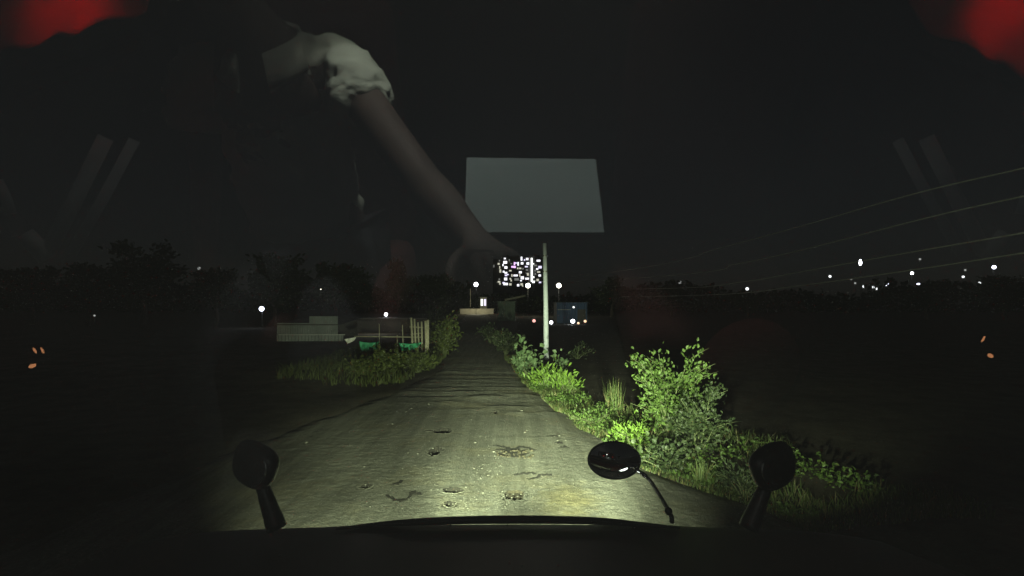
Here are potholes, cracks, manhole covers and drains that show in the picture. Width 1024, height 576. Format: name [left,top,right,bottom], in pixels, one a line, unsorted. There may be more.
pothole [501,489,527,502]
crack [495,435,570,480]
crack [385,480,422,502]
pothole [426,447,444,458]
